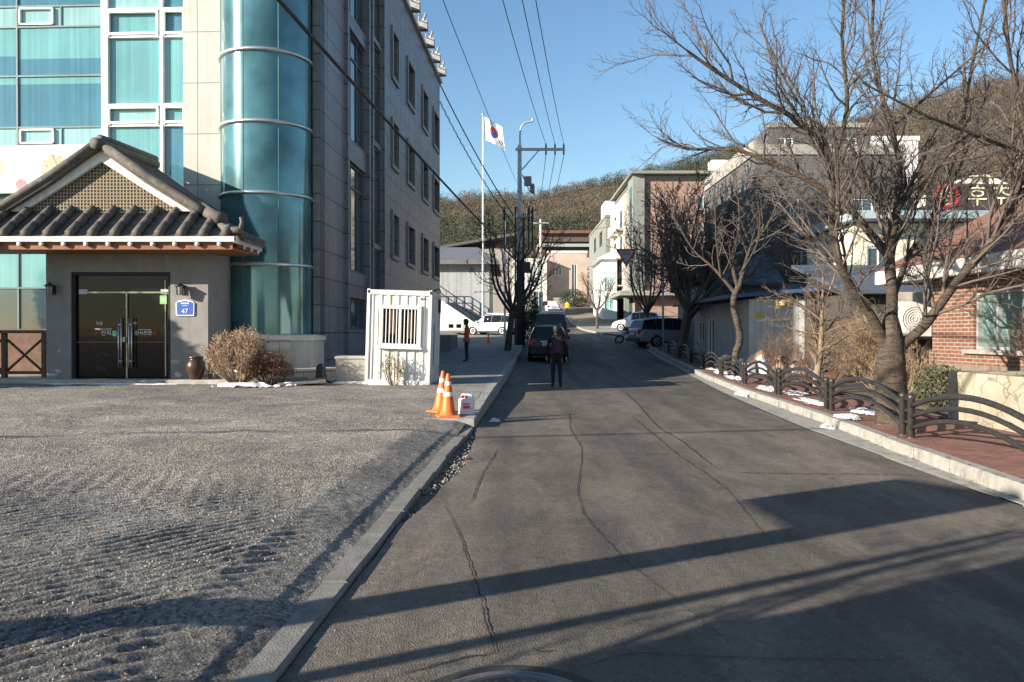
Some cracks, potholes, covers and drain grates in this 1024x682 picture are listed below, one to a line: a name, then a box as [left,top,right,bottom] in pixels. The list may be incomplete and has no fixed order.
crack [392,448,500,676]
crack [569,414,899,667]
crack [607,392,903,475]
